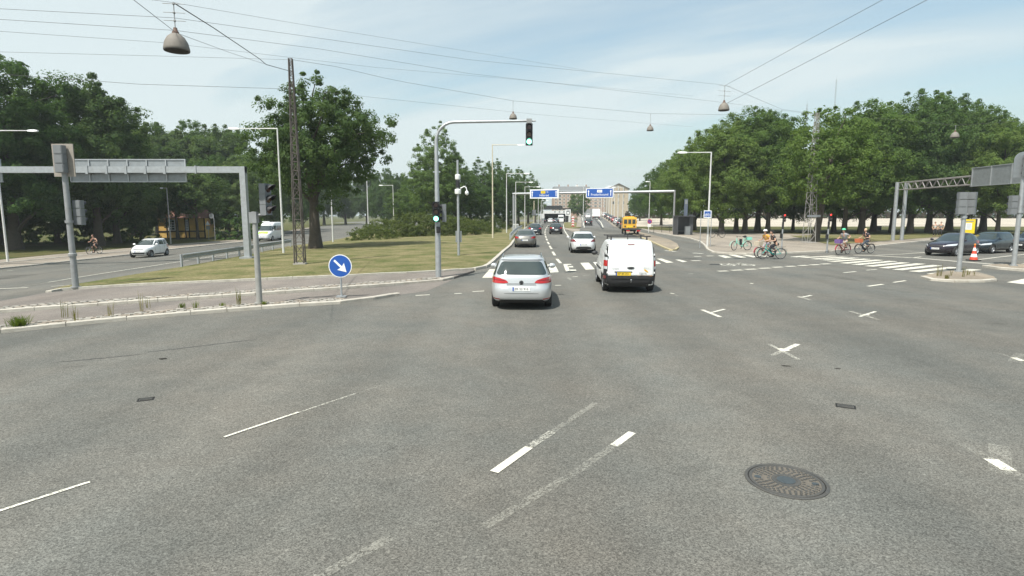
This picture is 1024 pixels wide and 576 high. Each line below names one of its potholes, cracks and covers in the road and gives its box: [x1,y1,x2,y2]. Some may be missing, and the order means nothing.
manhole cover [744,463,830,500]
